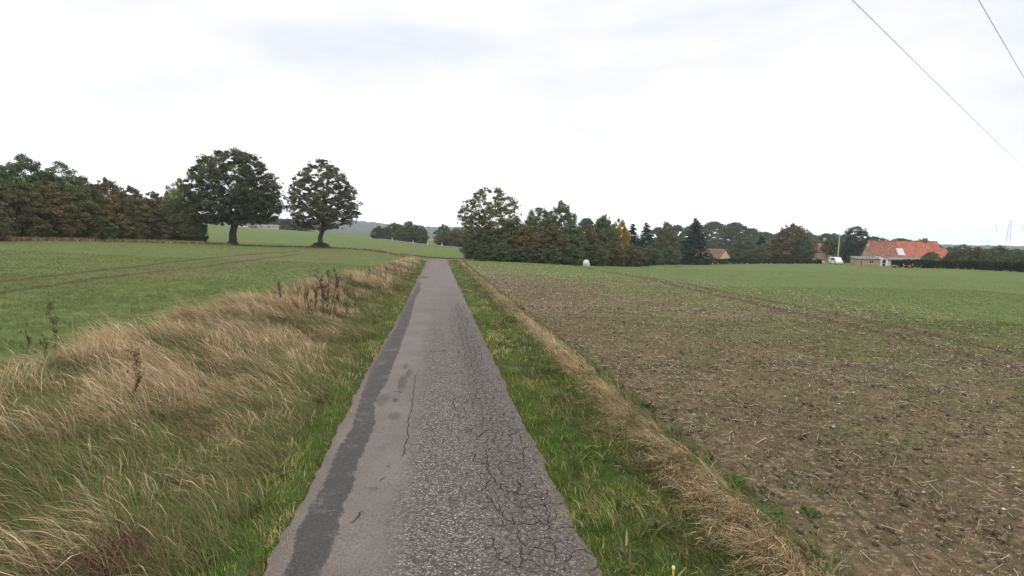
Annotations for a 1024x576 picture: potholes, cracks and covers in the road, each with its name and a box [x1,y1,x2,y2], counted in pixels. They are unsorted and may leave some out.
crack [450,306,599,576]
crack [394,350,445,454]
